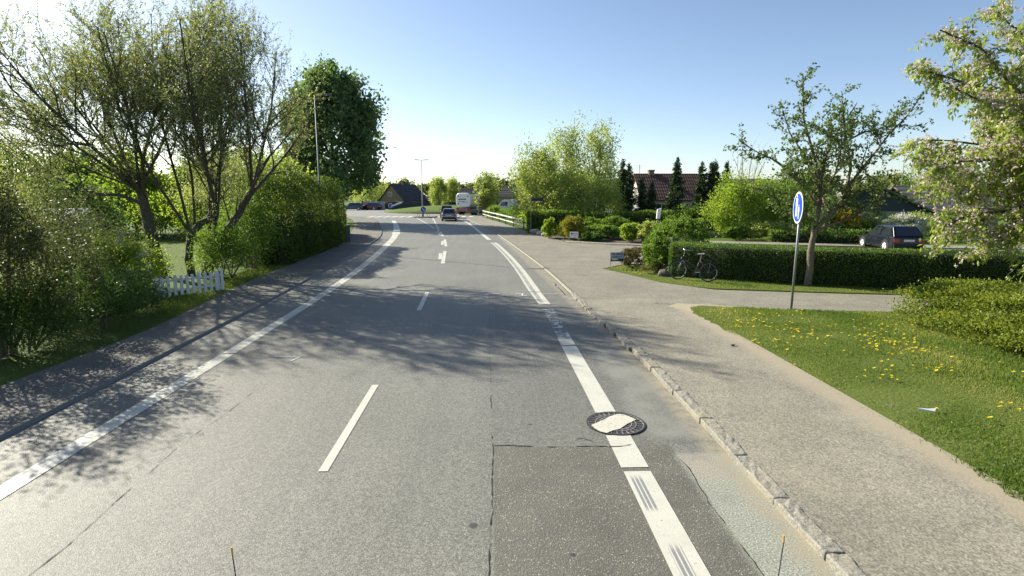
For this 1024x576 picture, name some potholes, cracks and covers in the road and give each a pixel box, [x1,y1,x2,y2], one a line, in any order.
manhole cover [586,412,645,435]
crack [680,459,764,576]
